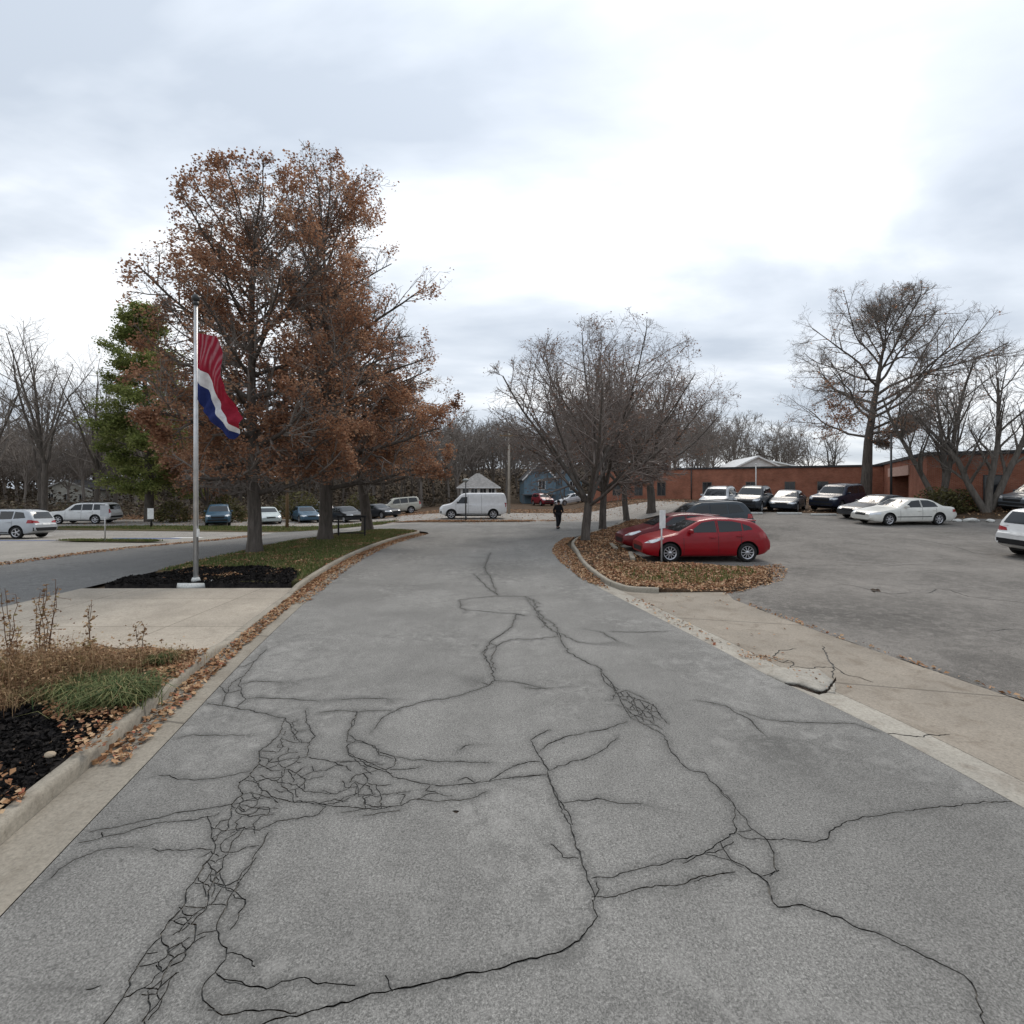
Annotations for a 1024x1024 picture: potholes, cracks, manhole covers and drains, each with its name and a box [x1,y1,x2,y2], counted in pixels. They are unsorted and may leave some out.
crack [214,560,984,1024]
crack [101,712,325,1024]
